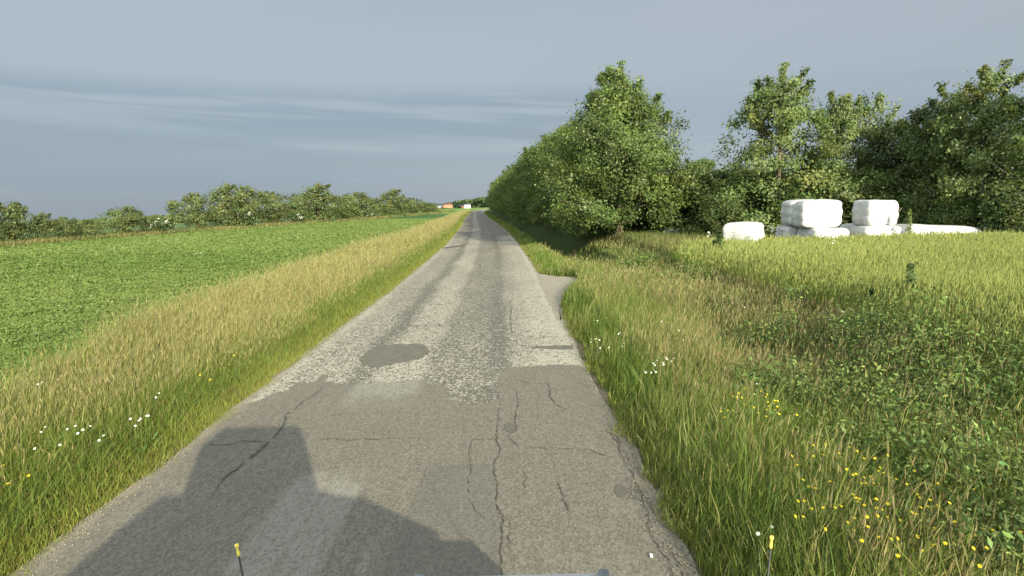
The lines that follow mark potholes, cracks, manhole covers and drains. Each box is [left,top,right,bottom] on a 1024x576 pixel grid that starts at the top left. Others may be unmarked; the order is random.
crack [467,379,684,576]
